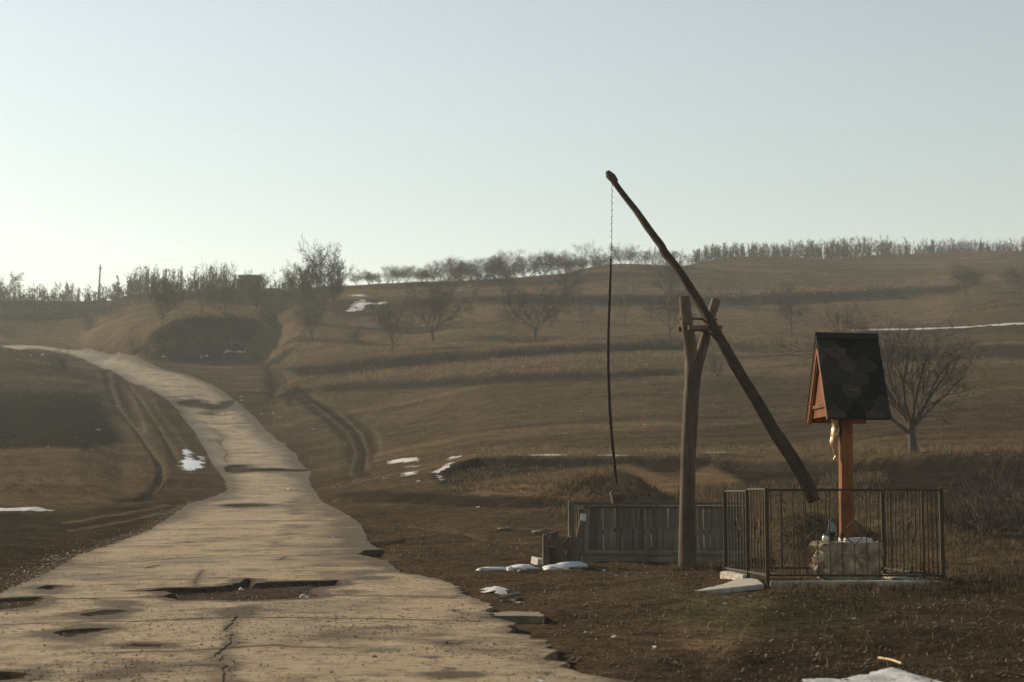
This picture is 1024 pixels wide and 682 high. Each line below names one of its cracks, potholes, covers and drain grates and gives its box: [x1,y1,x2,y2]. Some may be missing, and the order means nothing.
pothole [138,578,341,601]
pothole [224,465,311,473]
crack [12,596,468,682]
pothole [0,596,46,610]
pothole [176,400,235,410]
pothole [54,628,117,637]
